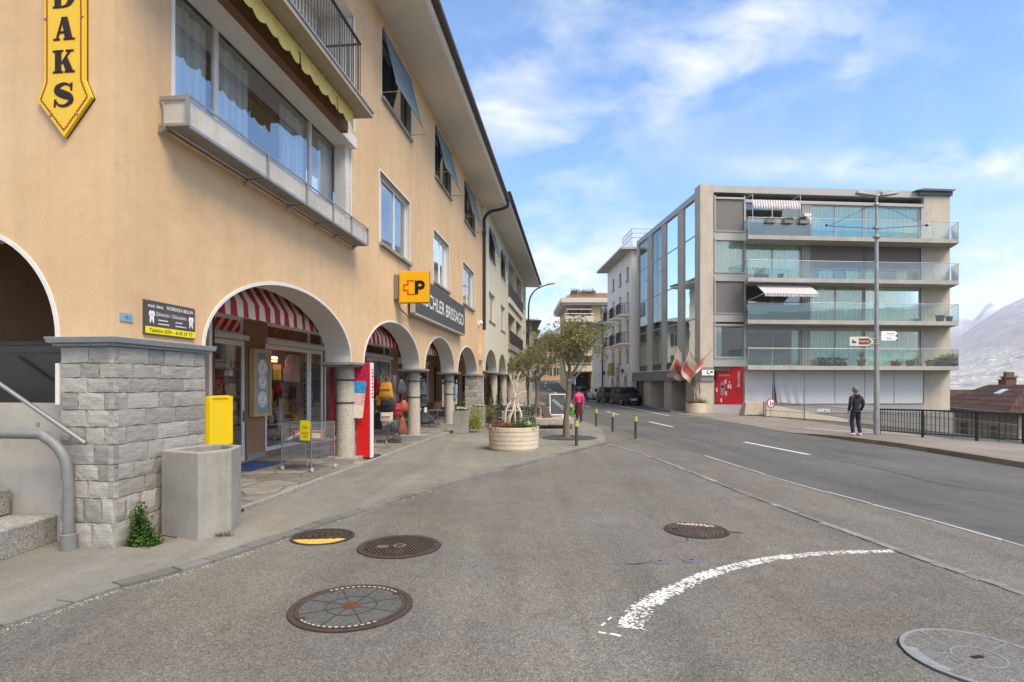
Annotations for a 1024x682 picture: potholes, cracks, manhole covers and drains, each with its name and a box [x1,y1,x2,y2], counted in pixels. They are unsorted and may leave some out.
manhole cover [664,522,730,539]
manhole cover [897,628,1024,682]
manhole cover [286,584,413,633]
manhole cover [356,535,441,559]
manhole cover [290,528,355,545]
